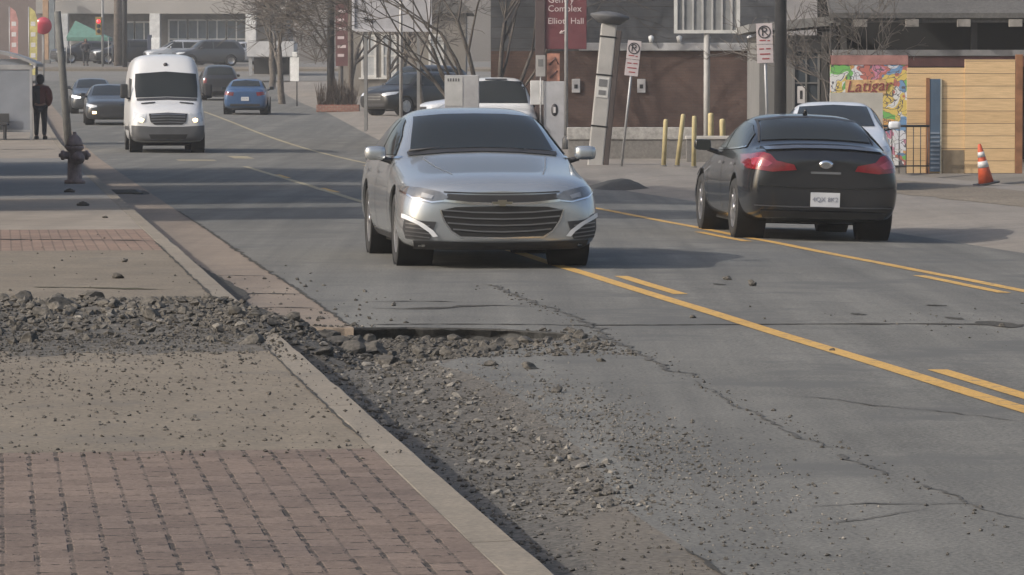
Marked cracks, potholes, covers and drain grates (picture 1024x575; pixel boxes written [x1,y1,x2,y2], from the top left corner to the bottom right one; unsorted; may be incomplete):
pothole [314,327,592,364]
crack [391,283,1024,522]
